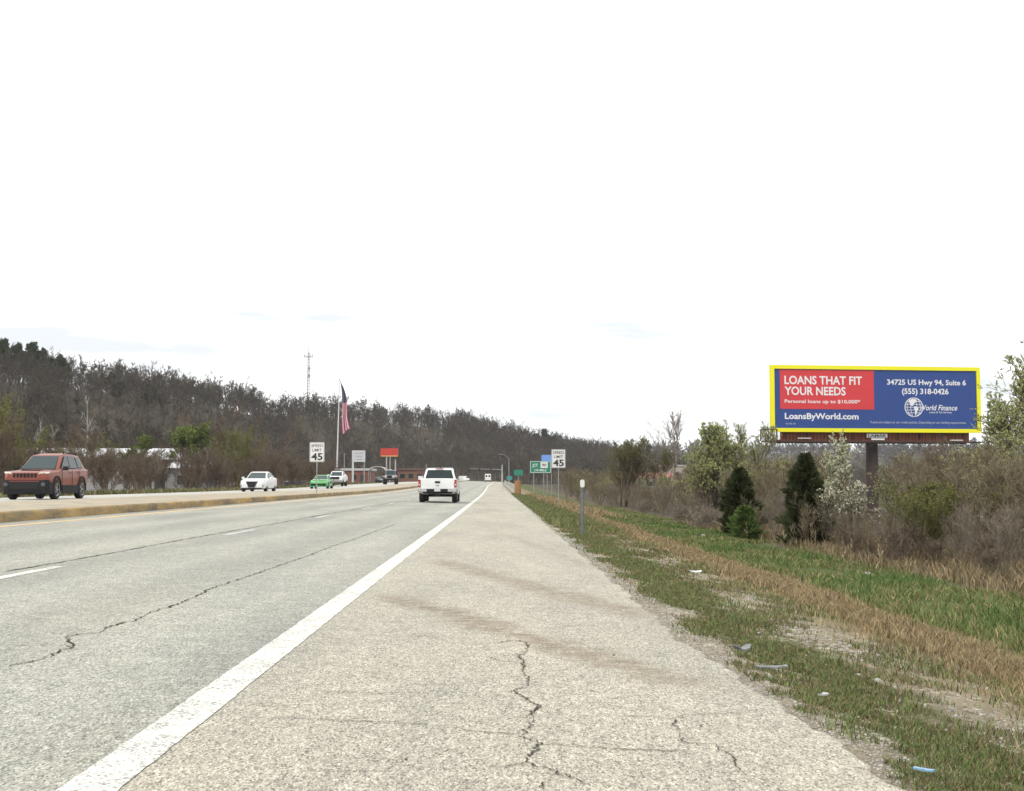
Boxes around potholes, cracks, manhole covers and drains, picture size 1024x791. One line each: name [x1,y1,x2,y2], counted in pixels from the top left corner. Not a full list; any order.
crack [11,526,390,665]
crack [454,640,689,790]
crack [620,712,747,770]
